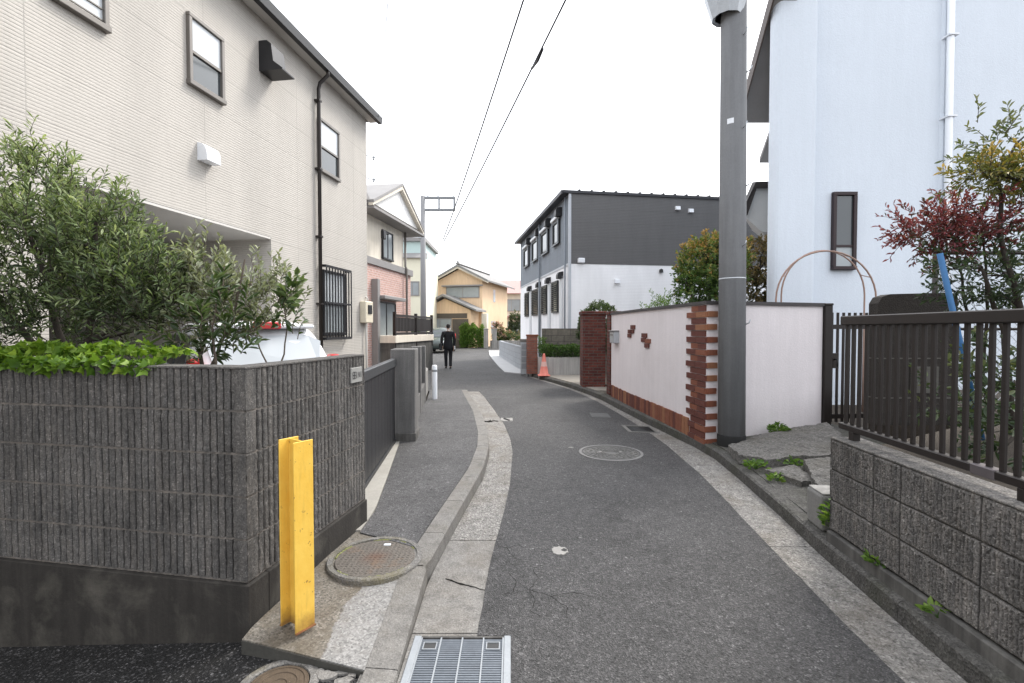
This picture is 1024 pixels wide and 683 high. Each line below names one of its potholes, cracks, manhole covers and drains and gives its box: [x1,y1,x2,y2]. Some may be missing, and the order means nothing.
manhole cover [240,660,319,683]
manhole cover [326,536,423,586]
crack [445,545,586,618]
manhole cover [579,445,644,461]
drain grate [400,636,511,683]
drain grate [621,425,659,433]
